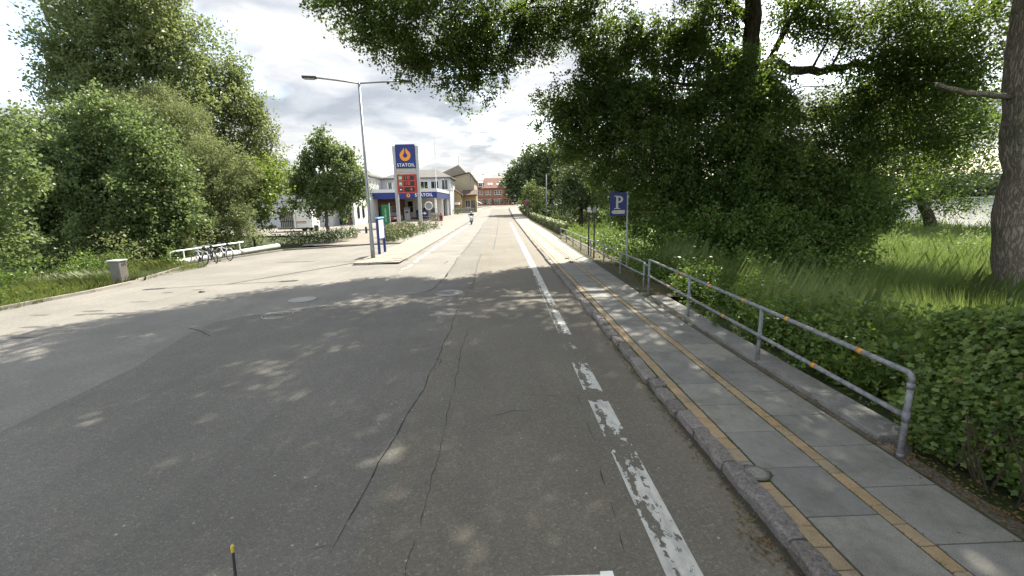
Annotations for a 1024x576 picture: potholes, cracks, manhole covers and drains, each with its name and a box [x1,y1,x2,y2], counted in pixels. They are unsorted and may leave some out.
crack [309,295,468,576]
manhole cover [261,311,294,319]
manhole cover [743,465,771,481]
